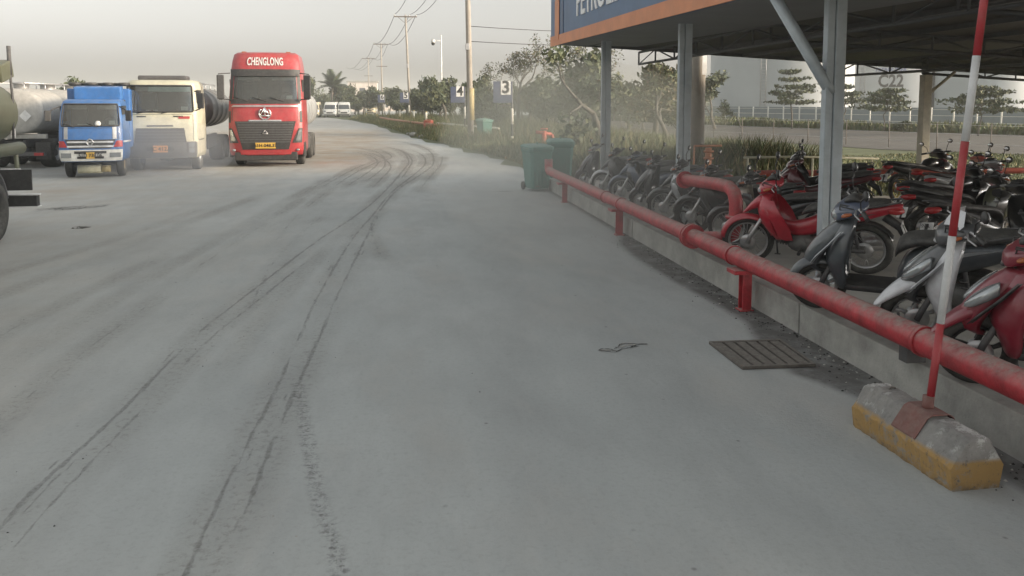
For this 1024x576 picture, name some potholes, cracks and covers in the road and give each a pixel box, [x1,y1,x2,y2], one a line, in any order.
drain grate [709,339,816,370]
crack [599,342,648,352]
